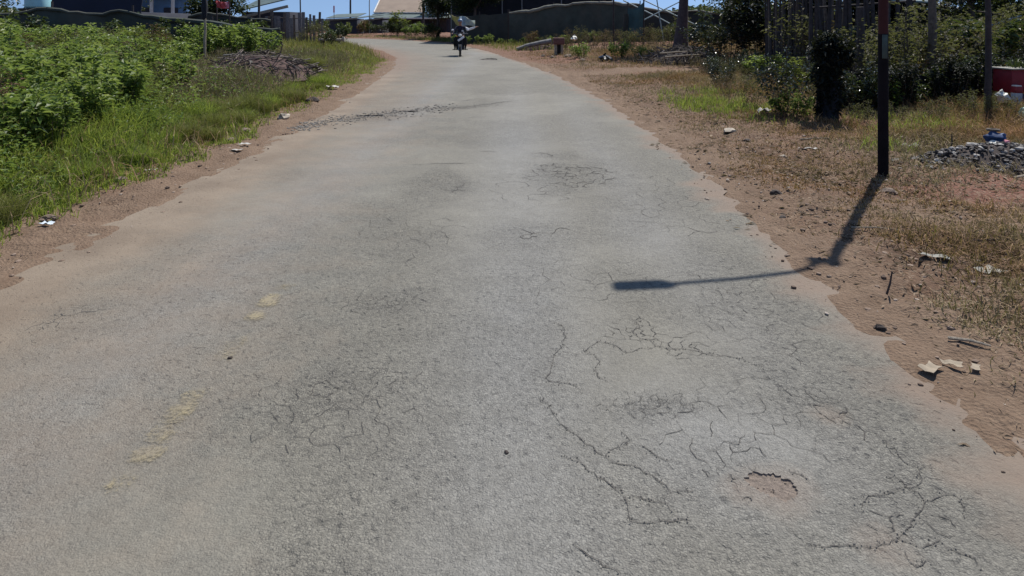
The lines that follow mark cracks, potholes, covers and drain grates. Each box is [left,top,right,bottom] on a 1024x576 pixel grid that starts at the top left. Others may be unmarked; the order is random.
crack [243,367,436,456]
pothole [744,471,798,502]
crack [808,440,982,570]
crack [573,543,620,573]
crack [496,153,617,210]
crack [512,259,898,524]
